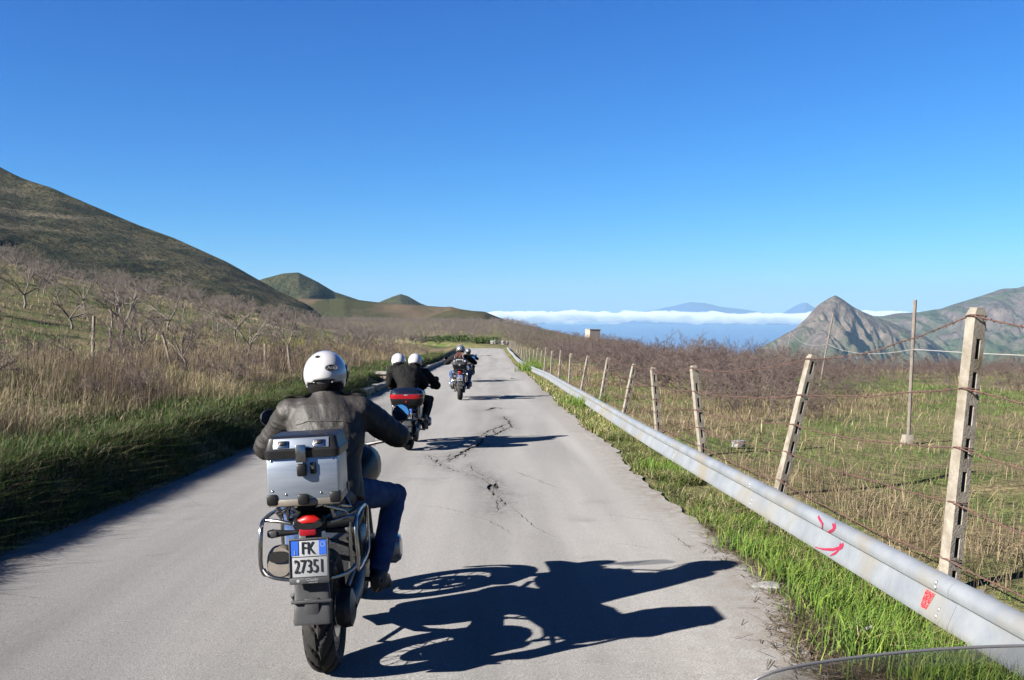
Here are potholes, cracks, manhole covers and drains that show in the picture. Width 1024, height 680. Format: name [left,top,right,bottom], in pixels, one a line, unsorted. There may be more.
crack [428,408,557,538]
